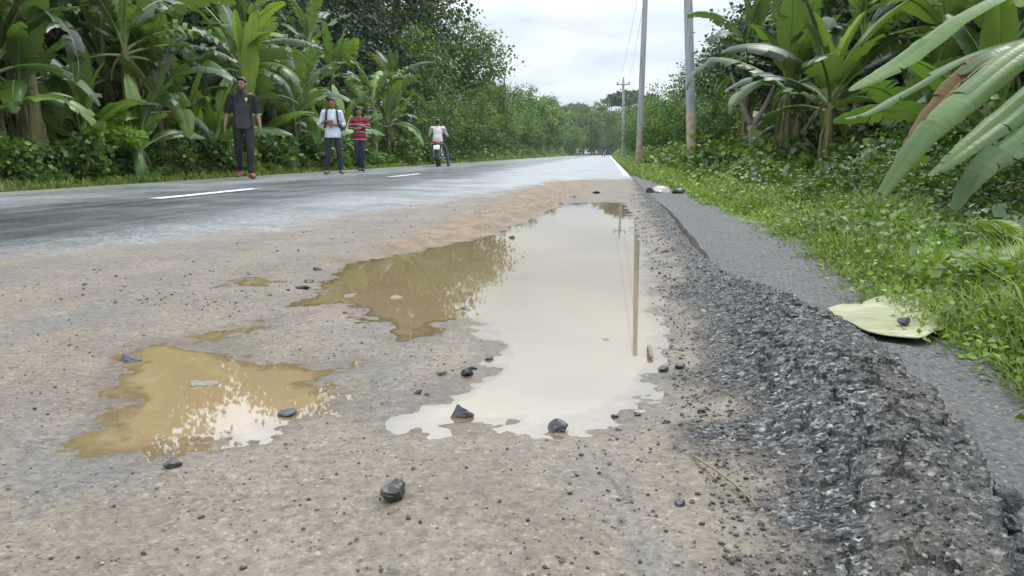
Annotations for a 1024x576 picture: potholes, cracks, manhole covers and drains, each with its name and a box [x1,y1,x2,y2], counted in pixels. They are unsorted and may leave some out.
pothole [49,337,391,464]
pothole [275,200,696,443]
